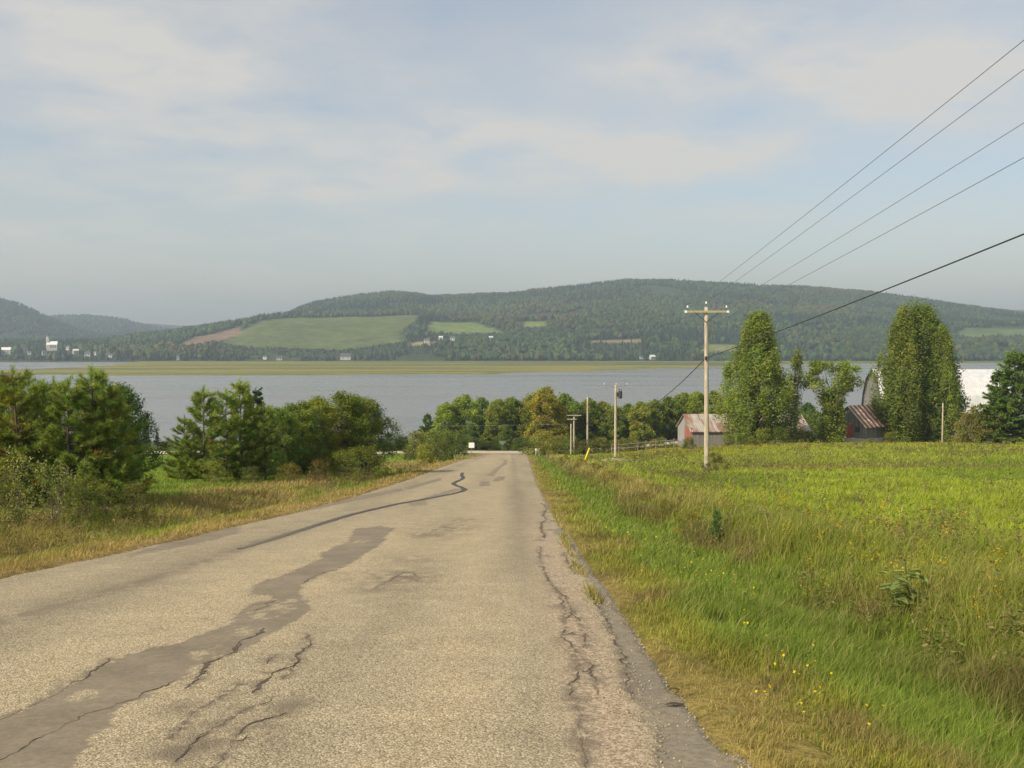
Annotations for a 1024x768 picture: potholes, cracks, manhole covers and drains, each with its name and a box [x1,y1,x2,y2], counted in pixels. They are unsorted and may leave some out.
crack [0,628,312,765]
crack [539,503,633,767]
